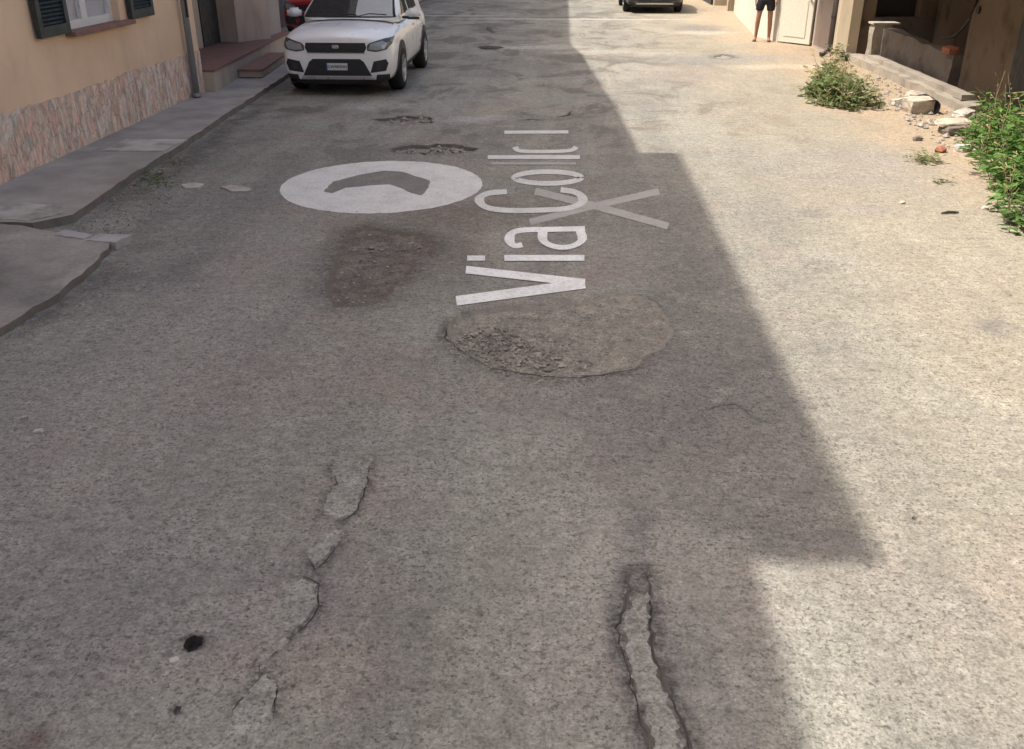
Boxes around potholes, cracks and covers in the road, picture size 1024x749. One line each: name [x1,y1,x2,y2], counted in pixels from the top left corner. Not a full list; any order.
pothole [424,293,674,388]
pothole [392,144,478,155]
pothole [373,116,433,125]
pothole [183,635,203,653]
crack [614,567,693,749]
